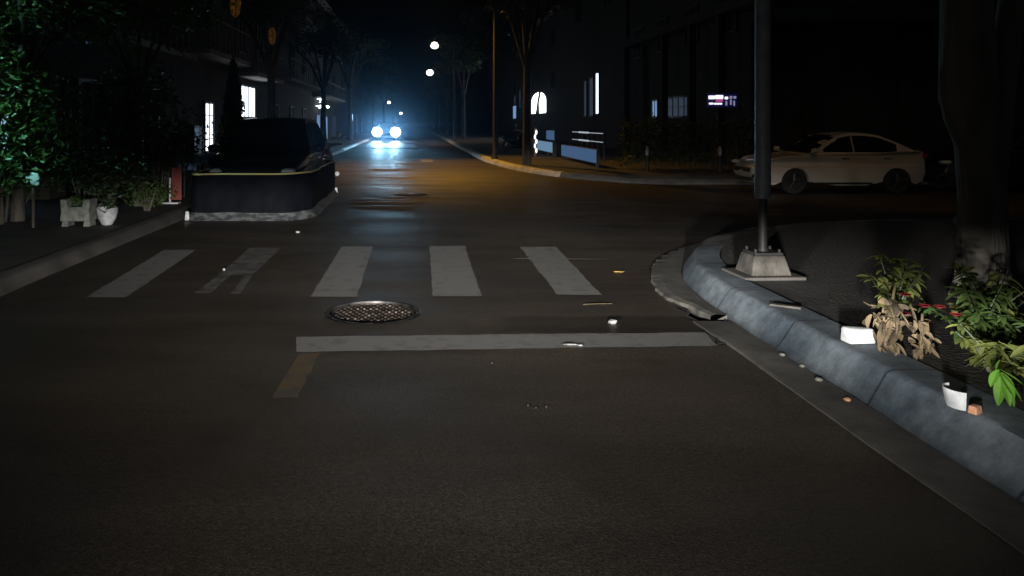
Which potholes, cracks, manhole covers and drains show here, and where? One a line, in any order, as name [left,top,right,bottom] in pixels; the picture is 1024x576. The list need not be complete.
manhole cover [326,300,420,324]
